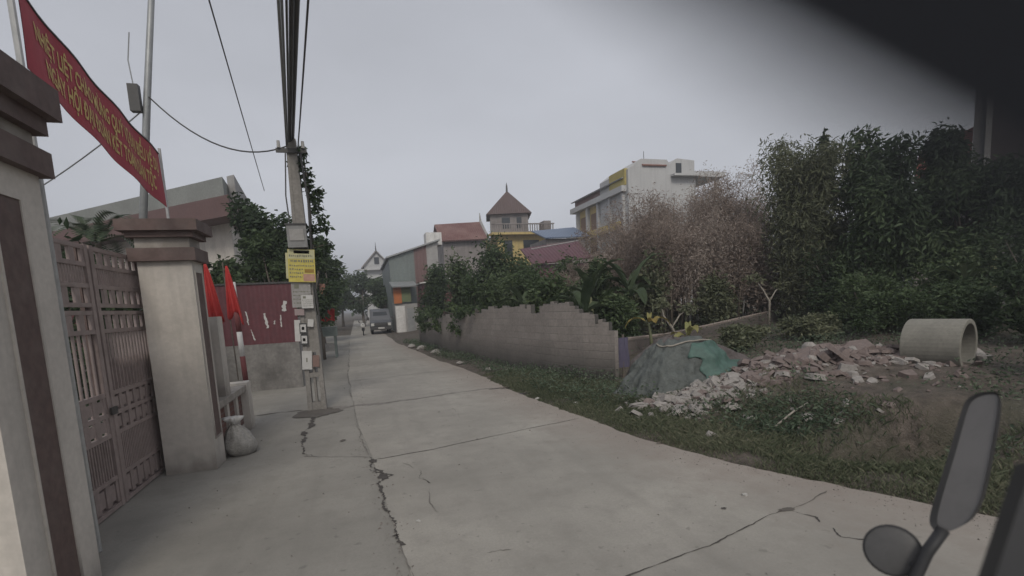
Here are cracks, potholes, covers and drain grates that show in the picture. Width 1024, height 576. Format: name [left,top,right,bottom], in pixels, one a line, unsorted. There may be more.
crack [369,457,438,576]
